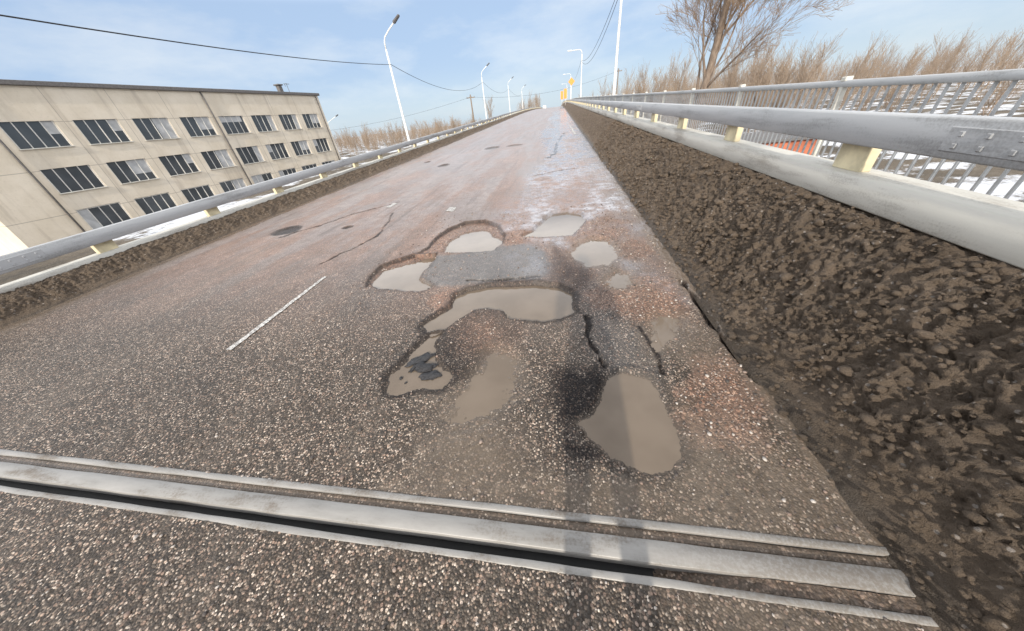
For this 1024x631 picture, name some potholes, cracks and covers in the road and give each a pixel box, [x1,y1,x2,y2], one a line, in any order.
pothole [597,266,644,294]
pothole [380,330,463,398]
pothole [418,219,507,253]
pothole [520,208,591,238]
pothole [566,365,699,487]
crack [582,315,606,368]
pothole [363,252,440,293]
crack [273,202,399,265]
pothole [417,279,581,339]
crack [533,133,576,176]
pothole [563,235,627,270]
